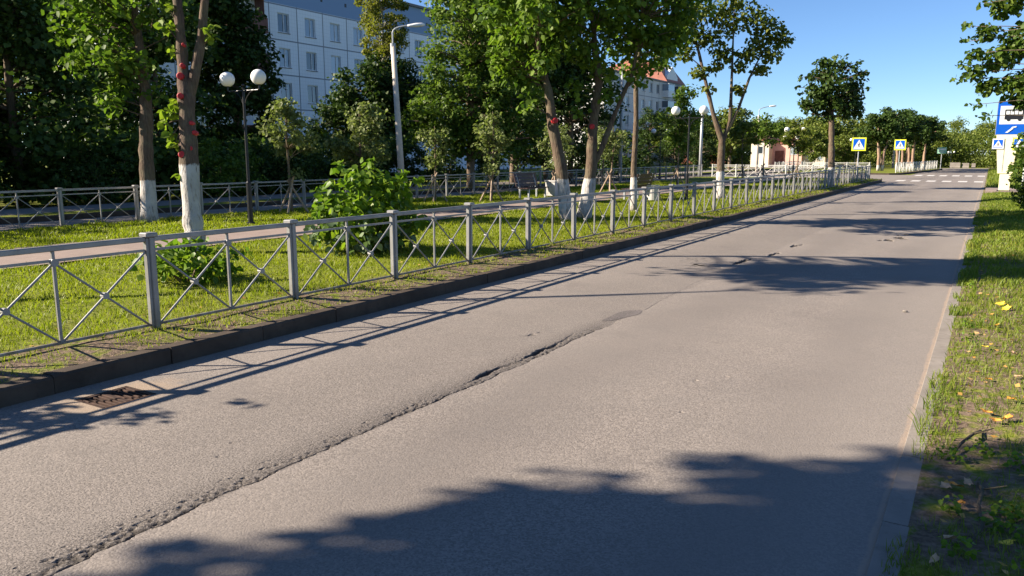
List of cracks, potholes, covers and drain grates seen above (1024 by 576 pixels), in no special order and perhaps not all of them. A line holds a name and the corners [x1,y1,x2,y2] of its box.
drain grate [75,386,156,409]
crack [12,322,615,576]
